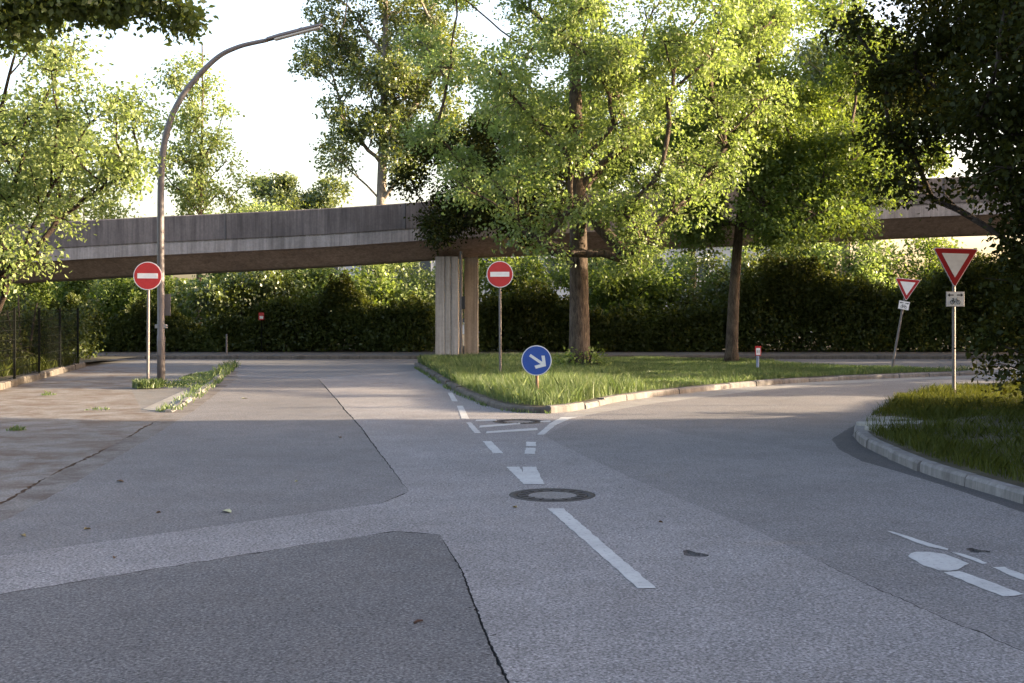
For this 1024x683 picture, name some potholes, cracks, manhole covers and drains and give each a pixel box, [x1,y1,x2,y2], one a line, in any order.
manhole cover [509,488,595,502]
